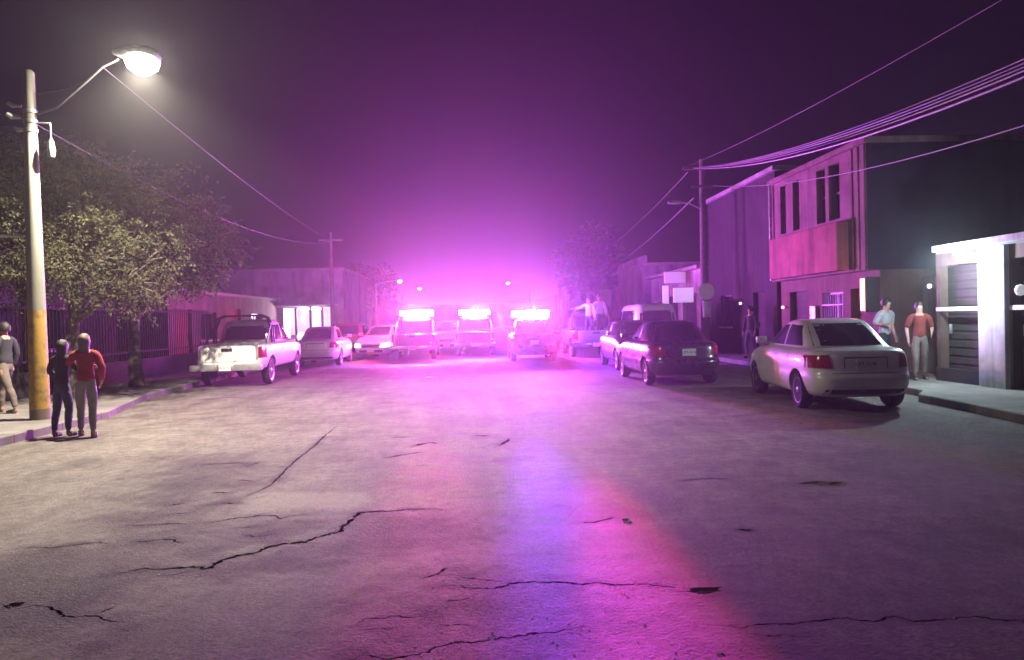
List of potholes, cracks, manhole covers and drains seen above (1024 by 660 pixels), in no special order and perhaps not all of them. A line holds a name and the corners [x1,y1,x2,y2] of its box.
crack [702,616,1024,637]
crack [352,615,573,660]
crack [423,568,680,601]
crack [113,463,443,576]
crack [27,605,117,622]
